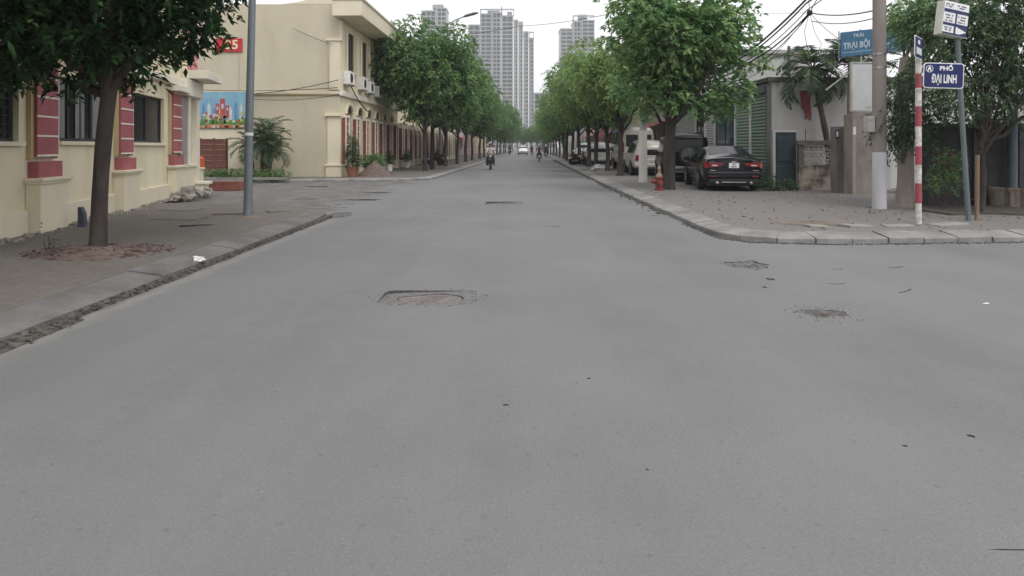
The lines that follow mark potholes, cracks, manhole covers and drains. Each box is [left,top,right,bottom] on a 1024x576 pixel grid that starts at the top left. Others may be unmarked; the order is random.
manhole cover [377,290,477,305]
pothole [720,260,770,270]
pothole [793,310,850,318]
